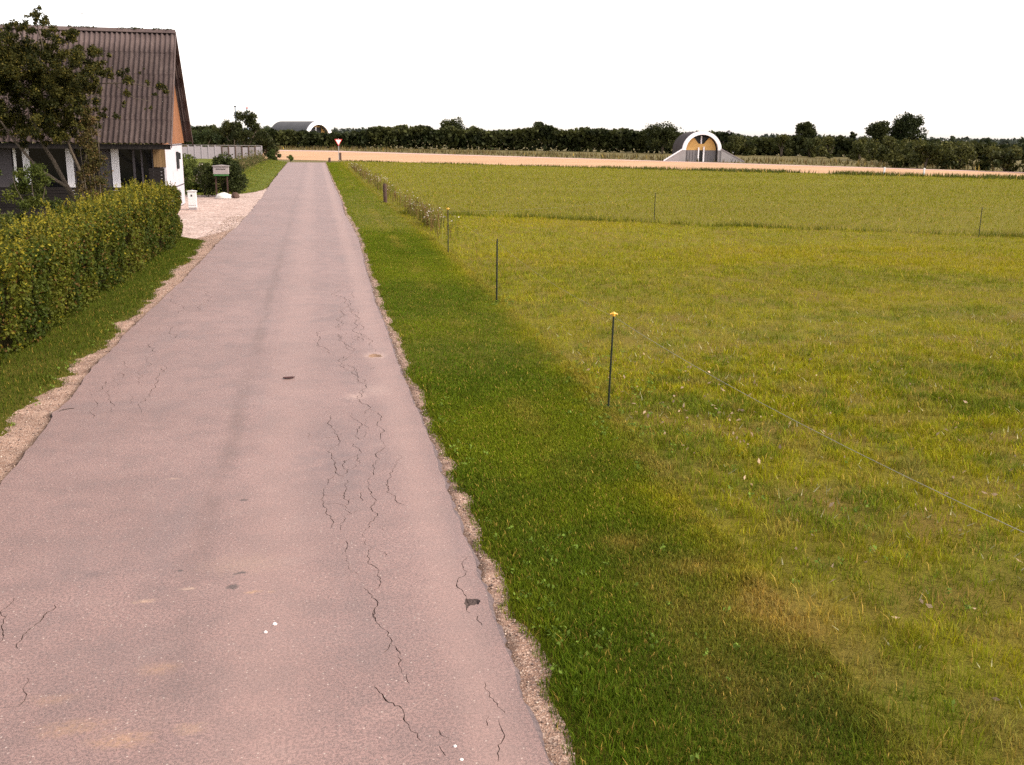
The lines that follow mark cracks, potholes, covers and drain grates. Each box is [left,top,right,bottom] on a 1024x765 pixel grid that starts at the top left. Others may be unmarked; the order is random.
crack [91,293,211,418]
crack [0,599,56,648]
crack [485,684,505,760]
crack [308,395,421,741]
